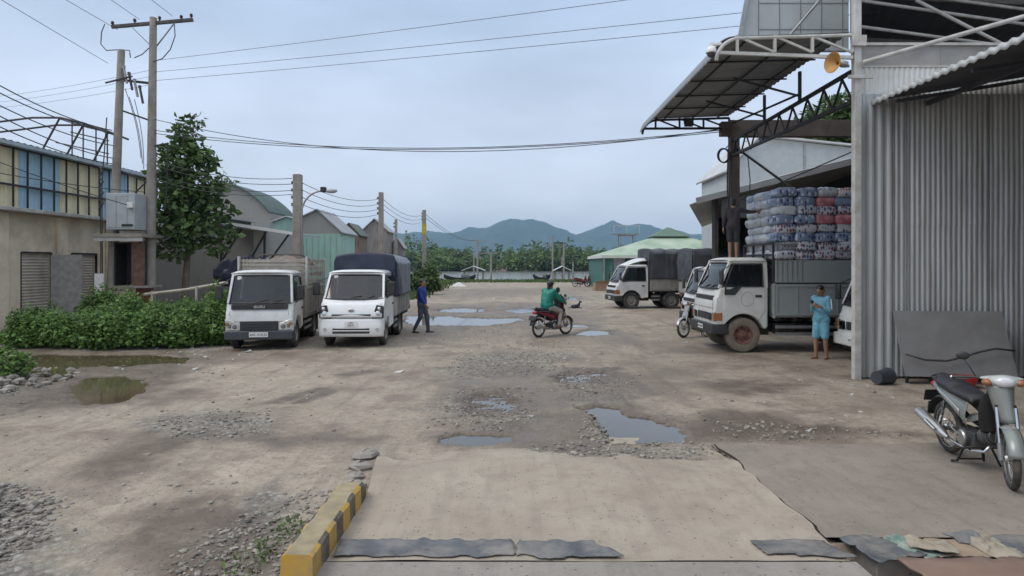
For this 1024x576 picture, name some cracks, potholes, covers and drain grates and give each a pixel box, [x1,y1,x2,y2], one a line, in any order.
pothole [434,431,518,446]
pothole [4,352,200,379]
pothole [548,368,621,383]
crack [711,444,819,533]
pothole [55,371,164,408]
pothole [457,390,528,417]
pothole [576,404,693,446]
pothole [403,315,529,326]
